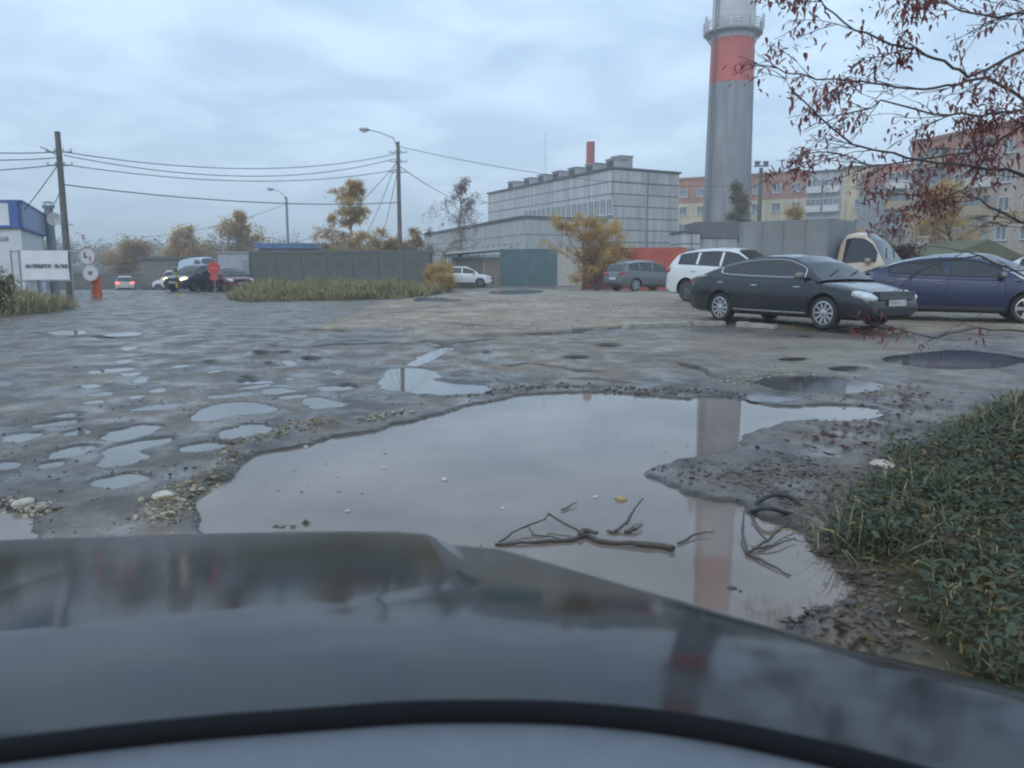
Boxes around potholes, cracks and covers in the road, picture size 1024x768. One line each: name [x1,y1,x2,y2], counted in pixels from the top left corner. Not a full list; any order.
pothole [93,436,174,468]
pothole [405,348,455,366]
pothole [82,472,154,489]
pothole [298,397,347,409]
pothole [99,423,165,442]
pothole [174,439,242,452]
pothole [189,401,278,422]
pothole [213,423,278,439]
